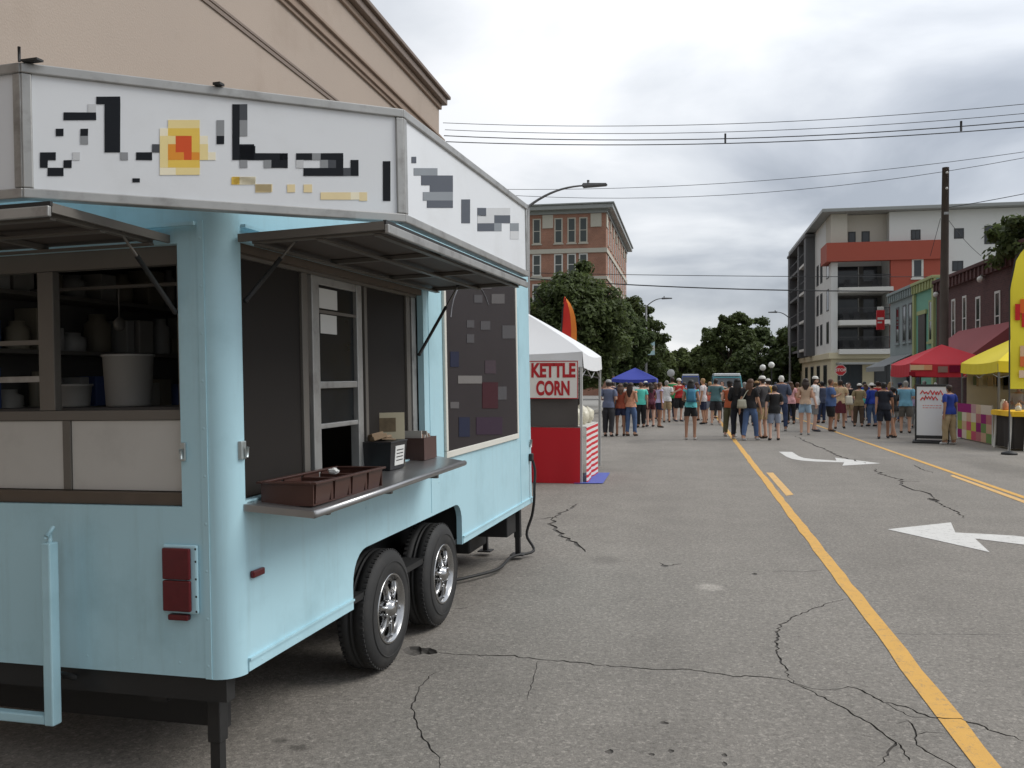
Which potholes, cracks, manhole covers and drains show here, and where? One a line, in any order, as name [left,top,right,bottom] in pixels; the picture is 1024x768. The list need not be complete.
crack [544,503,586,552]
crack [439,599,1023,768]
crack [799,437,964,518]
pothole [403,646,437,656]
crack [410,671,441,768]
